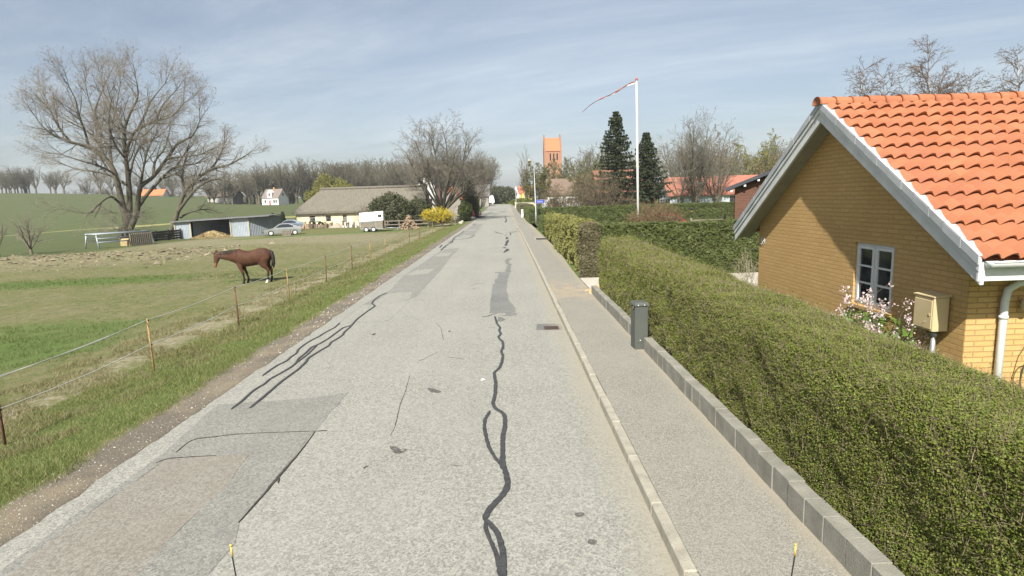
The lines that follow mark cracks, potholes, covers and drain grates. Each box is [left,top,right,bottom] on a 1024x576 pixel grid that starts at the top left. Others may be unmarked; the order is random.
crack [391,323,460,434]
